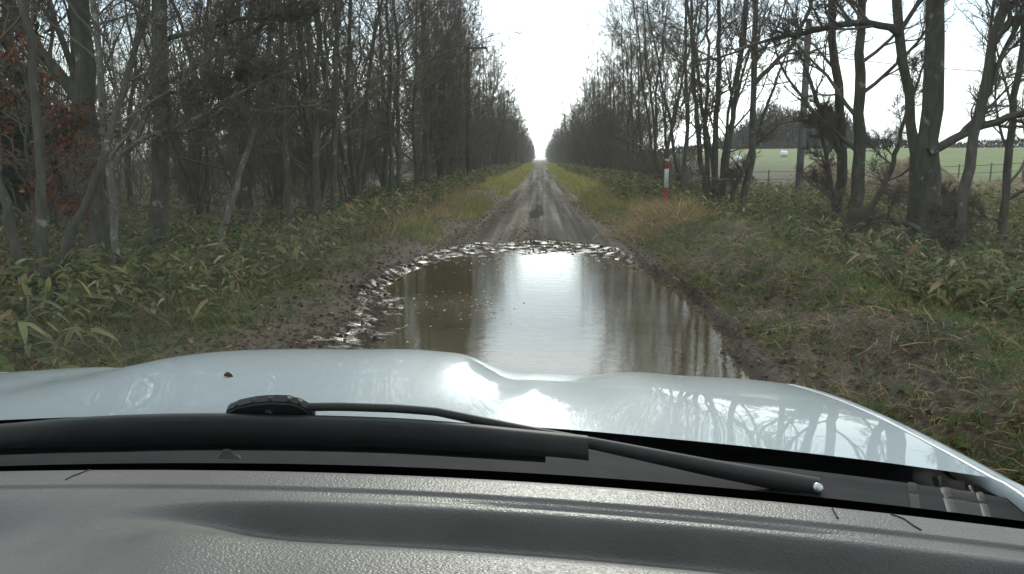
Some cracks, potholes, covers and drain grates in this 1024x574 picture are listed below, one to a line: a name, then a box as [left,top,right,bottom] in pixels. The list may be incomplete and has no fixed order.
pothole [526,204,546,218]
pothole [275,240,783,383]
